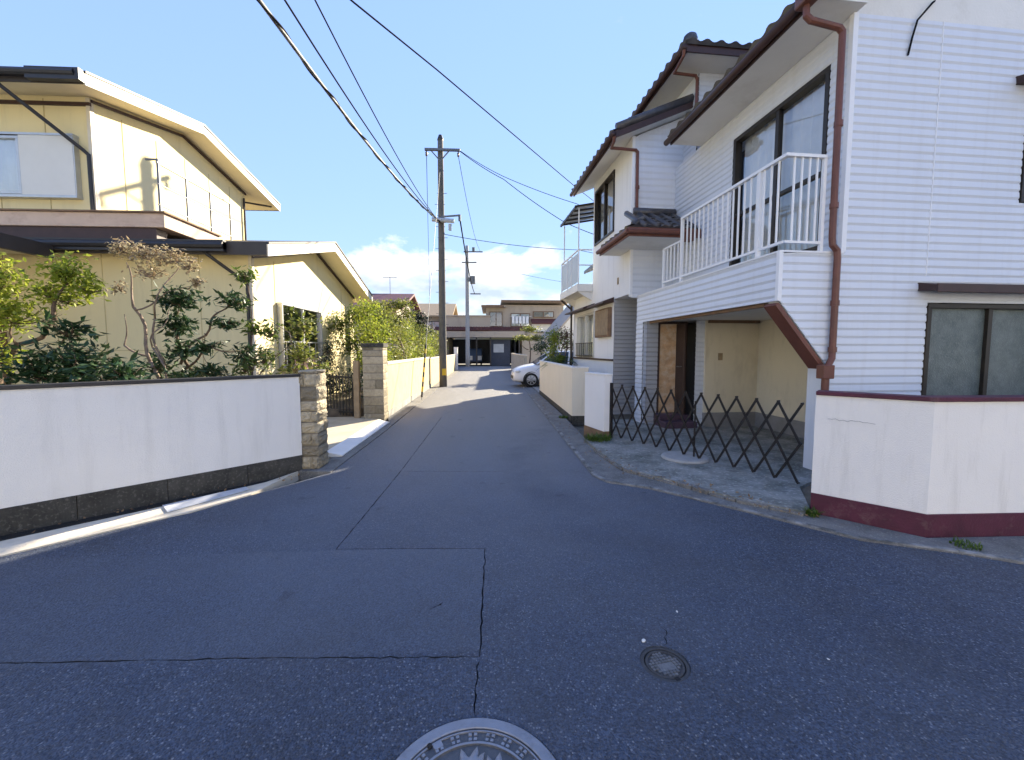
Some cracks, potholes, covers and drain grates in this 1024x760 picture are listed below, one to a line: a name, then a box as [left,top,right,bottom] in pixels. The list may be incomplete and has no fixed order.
manhole cover [396,718,556,760]
crack [0,426,579,714]
manhole cover [640,647,691,682]
